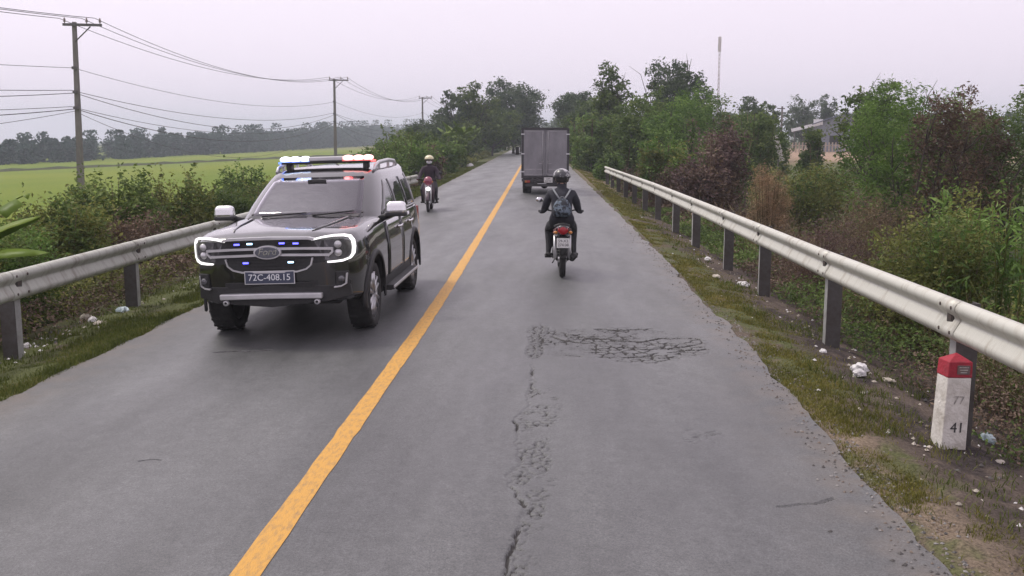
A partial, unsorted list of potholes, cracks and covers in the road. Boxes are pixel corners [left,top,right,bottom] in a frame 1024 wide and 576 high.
crack [775,497,838,508]
crack [680,428,729,450]
crack [498,316,716,576]
